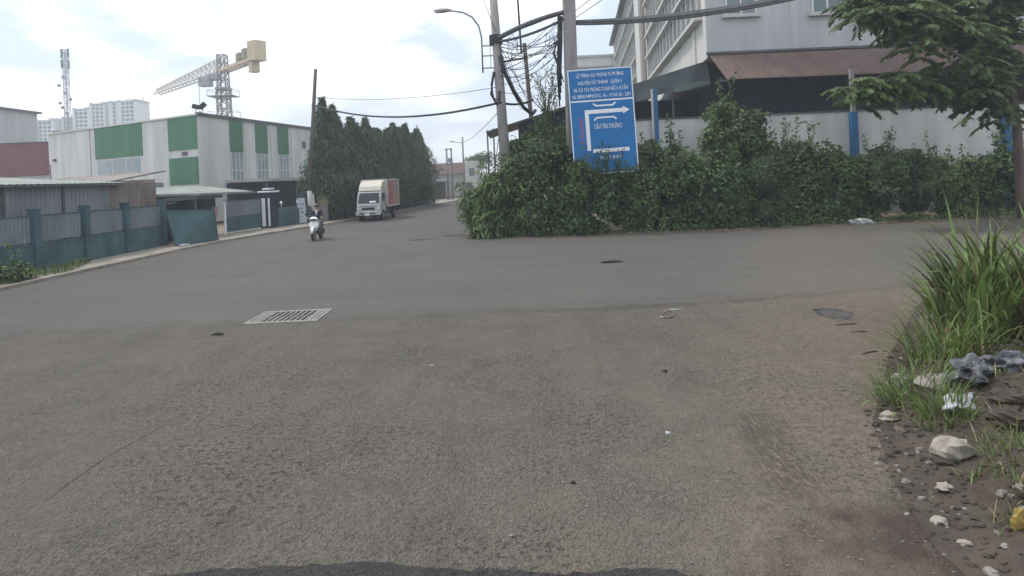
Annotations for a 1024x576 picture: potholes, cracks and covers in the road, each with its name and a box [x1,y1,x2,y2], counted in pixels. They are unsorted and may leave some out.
crack [44,412,187,502]
drain grate [243,308,333,324]
